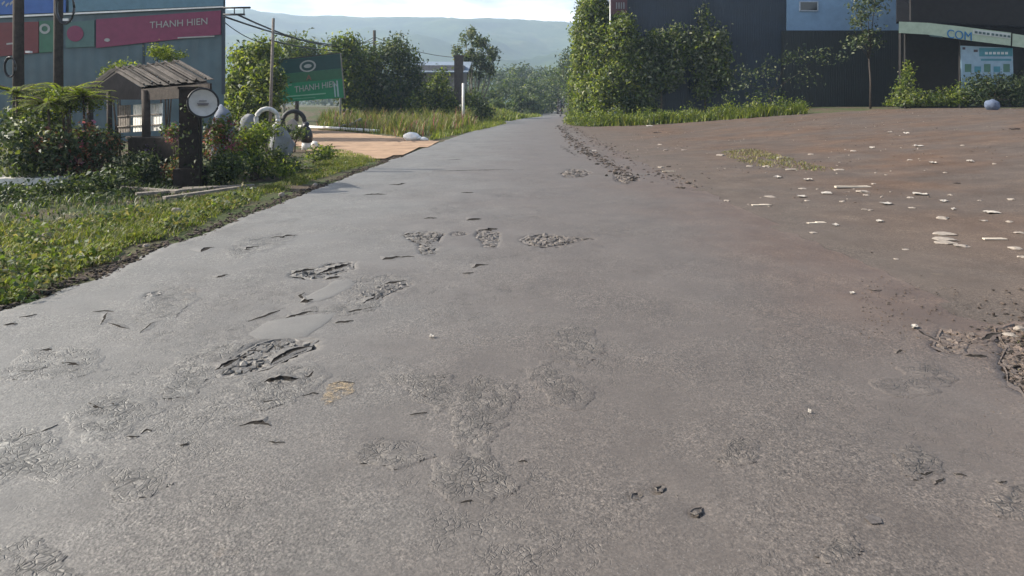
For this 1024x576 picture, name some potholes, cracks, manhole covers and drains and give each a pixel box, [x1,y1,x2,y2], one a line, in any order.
crack [0,216,444,502]
pothole [350,282,412,302]
pothole [290,261,355,280]
pothole [404,230,443,257]
pothole [215,337,318,379]
pothole [613,171,638,185]
pothole [475,230,500,249]
pothole [519,233,595,248]
